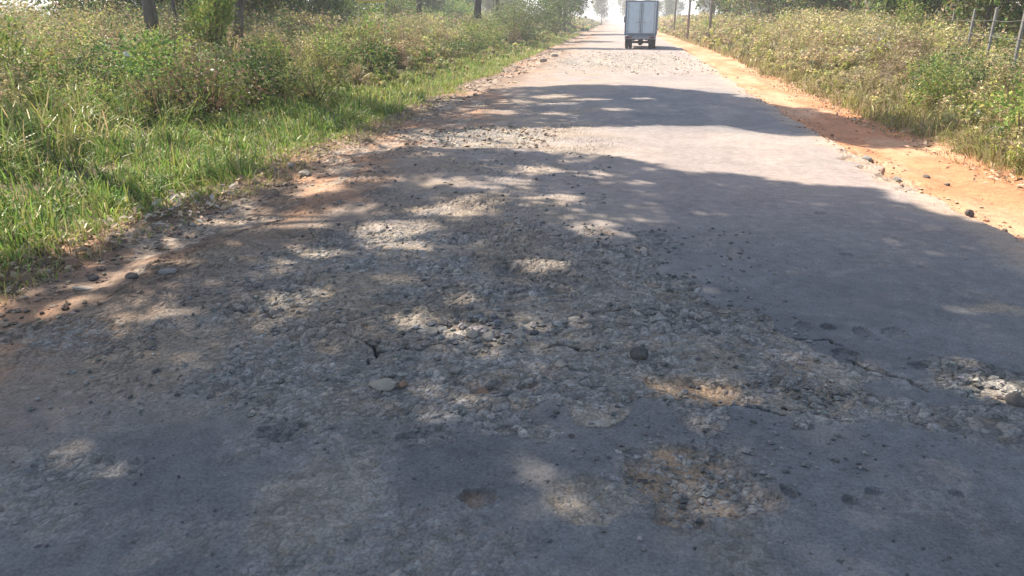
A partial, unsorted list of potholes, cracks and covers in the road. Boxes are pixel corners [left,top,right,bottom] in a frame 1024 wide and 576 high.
pothole [623,374,782,407]
pothole [779,483,799,499]
crack [364,341,447,365]
pothole [923,355,1024,404]
pothole [620,441,790,534]
crack [792,337,931,393]
